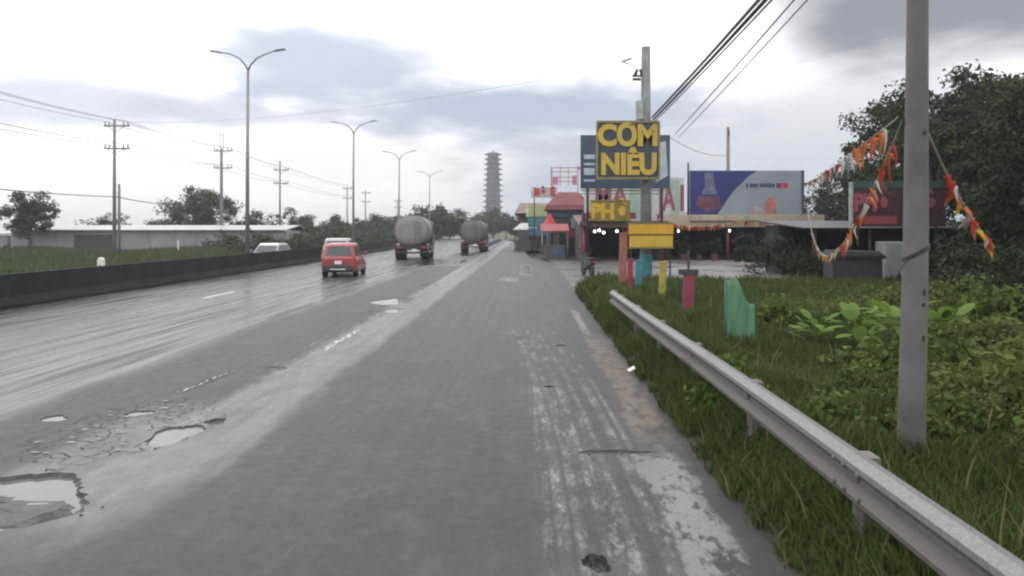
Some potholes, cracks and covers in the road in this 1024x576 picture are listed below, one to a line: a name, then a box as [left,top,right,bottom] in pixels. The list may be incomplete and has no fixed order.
pothole [581,554,611,573]
pothole [145,421,210,449]
pothole [0,469,104,531]
crack [20,370,233,470]
